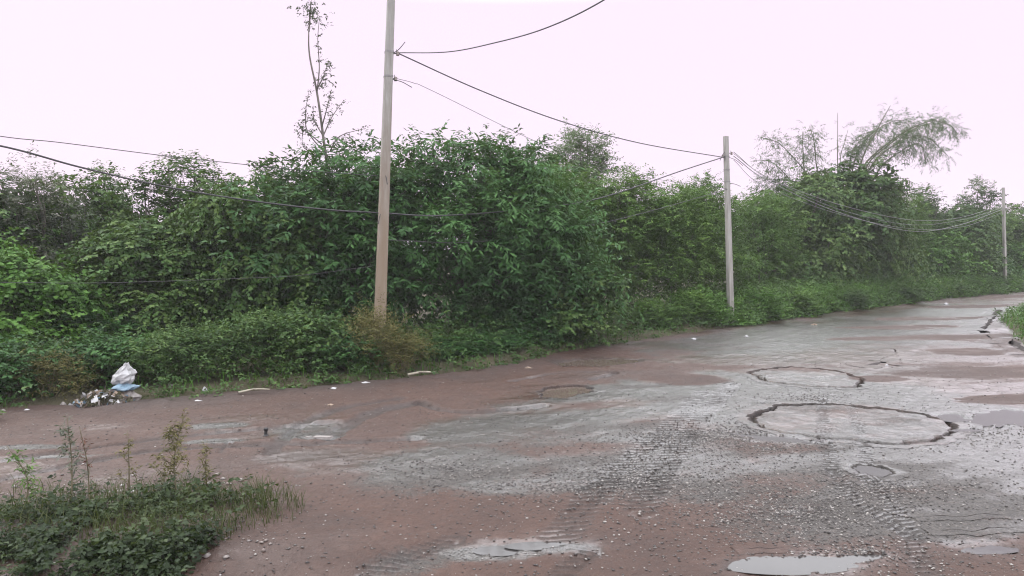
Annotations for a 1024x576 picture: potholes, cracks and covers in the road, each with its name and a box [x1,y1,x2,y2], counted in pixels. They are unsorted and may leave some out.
crack [907,510,1024,536]
crack [846,348,915,369]
pothole [736,401,971,449]
pothole [527,383,602,400]
pothole [836,460,911,482]
pothole [739,365,875,390]
